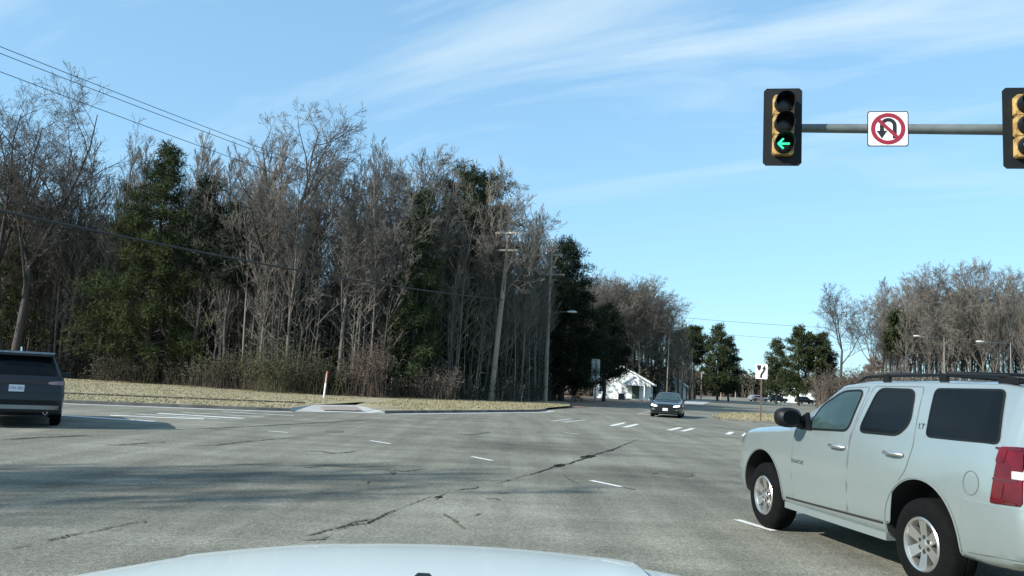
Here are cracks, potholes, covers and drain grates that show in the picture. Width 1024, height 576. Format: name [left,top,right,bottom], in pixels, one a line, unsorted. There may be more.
crack [300,442,630,540]
crack [12,519,145,548]
